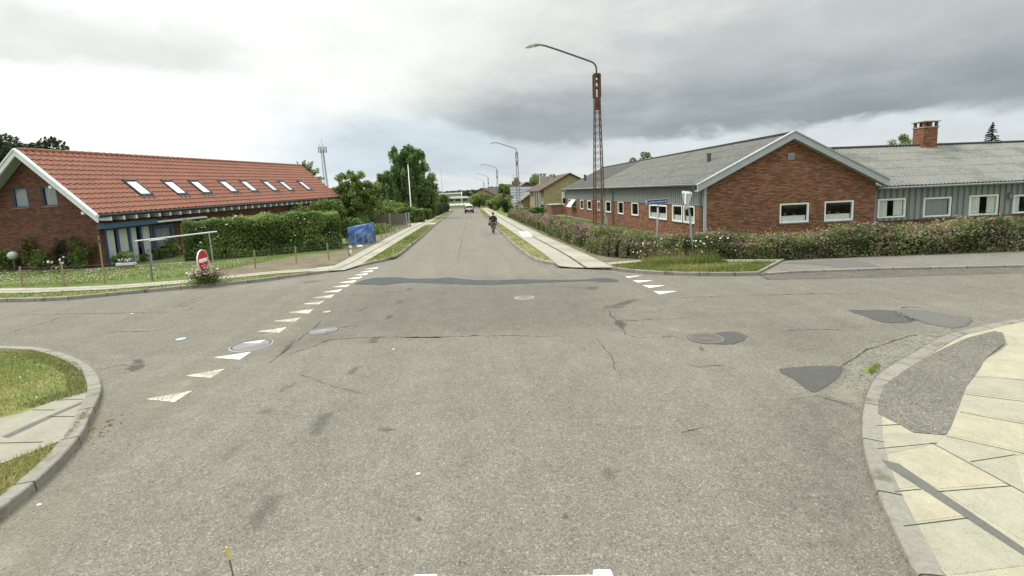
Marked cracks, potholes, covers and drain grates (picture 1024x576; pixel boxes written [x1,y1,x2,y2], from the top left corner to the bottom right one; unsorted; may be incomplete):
crack [269,308,523,363]
crack [839,335,927,367]
manhole cover [687,333,726,344]
manhole cover [307,326,339,335]
manhole cover [229,339,273,352]
